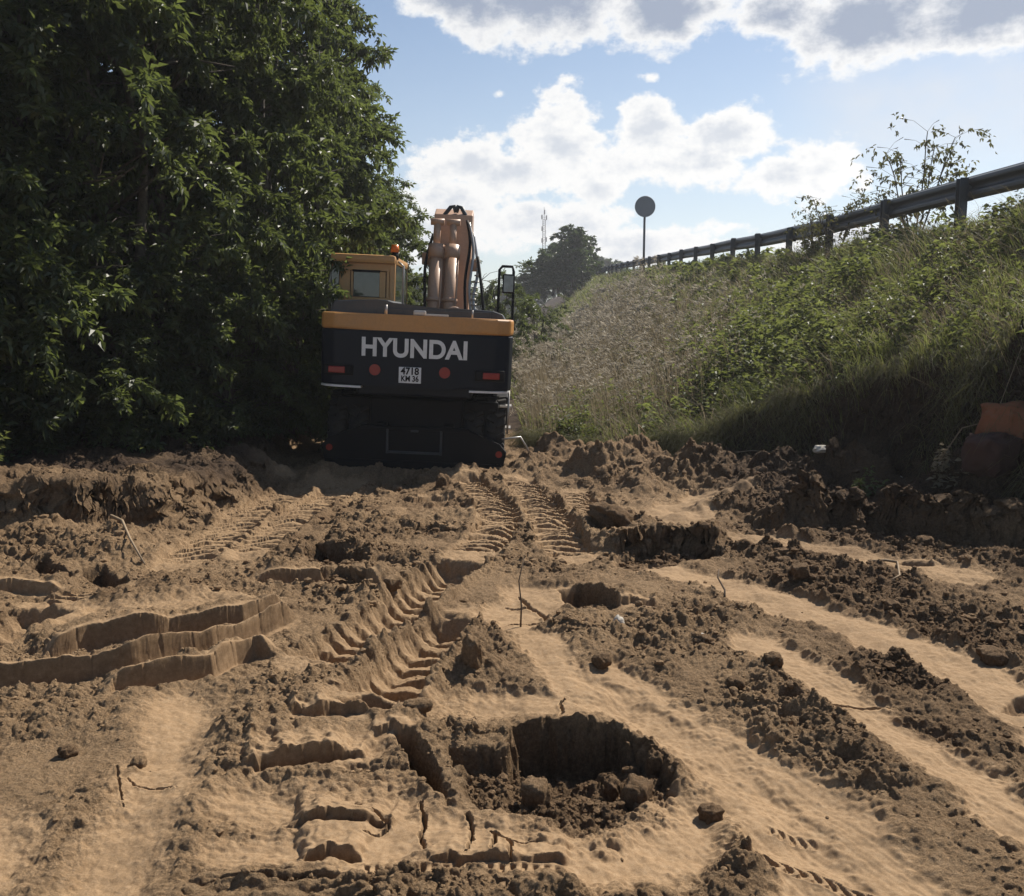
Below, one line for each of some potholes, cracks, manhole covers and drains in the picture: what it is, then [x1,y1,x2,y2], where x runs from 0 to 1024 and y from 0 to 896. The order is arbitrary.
pothole [444,712,685,850]
pothole [556,581,624,614]
